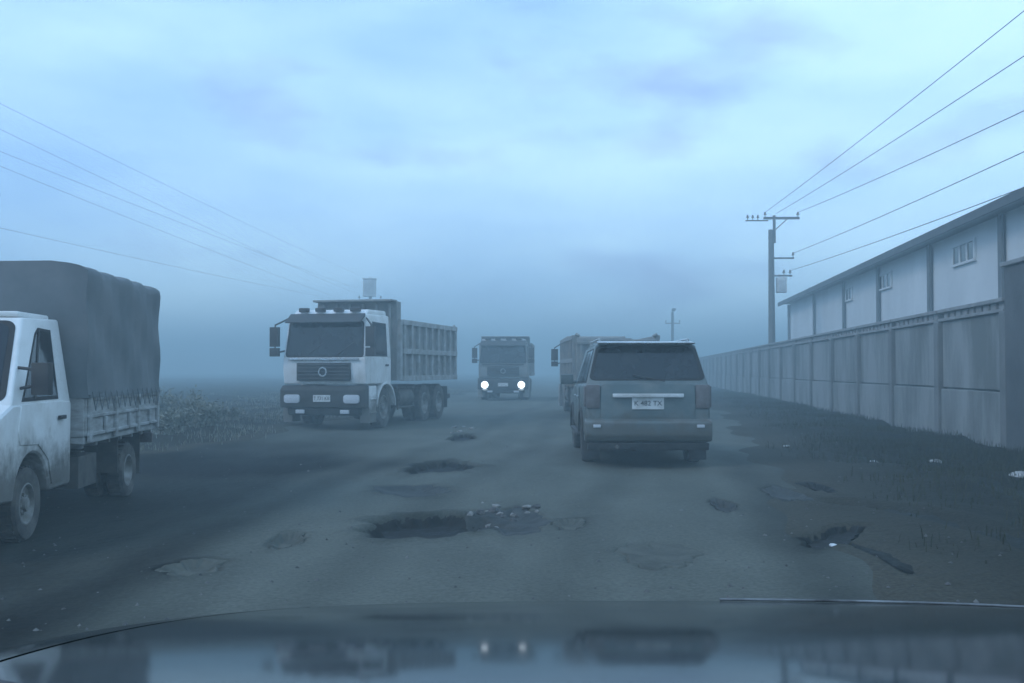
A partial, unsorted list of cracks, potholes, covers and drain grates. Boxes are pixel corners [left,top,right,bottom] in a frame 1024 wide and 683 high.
pothole [154,558,228,576]
pothole [267,531,307,550]
pothole [800,526,867,549]
pothole [796,482,837,493]
pothole [364,515,480,539]
pothole [465,508,551,536]
pothole [406,461,478,474]
pothole [552,518,586,531]
pothole [709,499,737,513]
